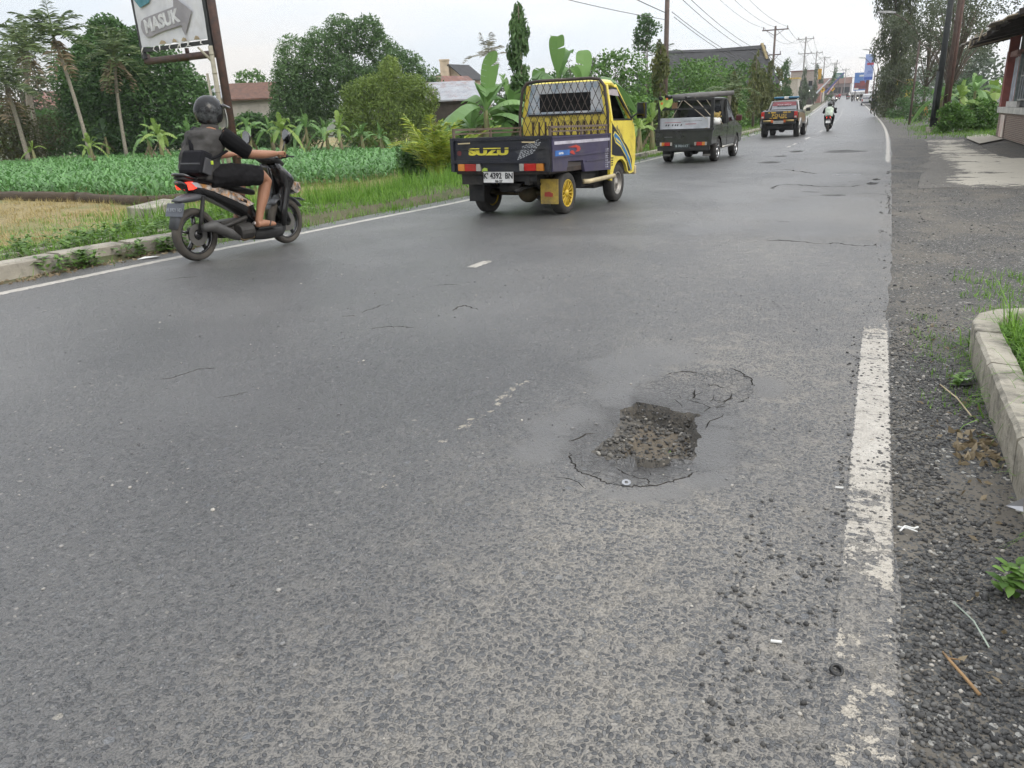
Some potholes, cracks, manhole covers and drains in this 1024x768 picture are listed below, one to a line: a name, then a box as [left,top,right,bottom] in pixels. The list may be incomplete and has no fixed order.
crack [558,433,698,488]
pothole [591,402,702,468]
crack [654,368,755,428]
crack [771,169,891,214]
